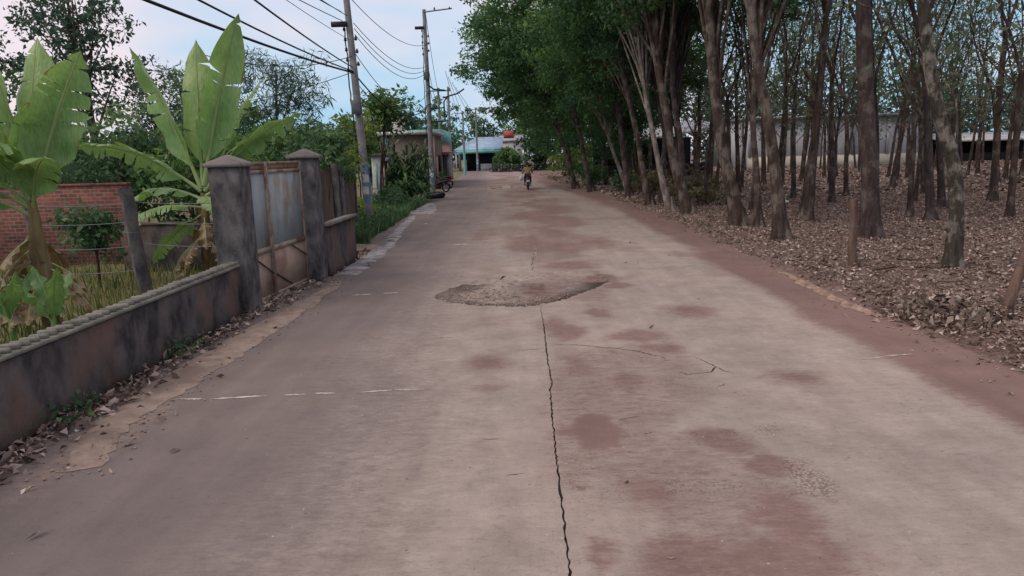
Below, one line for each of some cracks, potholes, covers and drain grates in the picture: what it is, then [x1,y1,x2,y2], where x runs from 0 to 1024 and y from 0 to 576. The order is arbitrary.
crack [525,219,537,271]
crack [529,312,662,576]
pothole [434,271,610,307]
